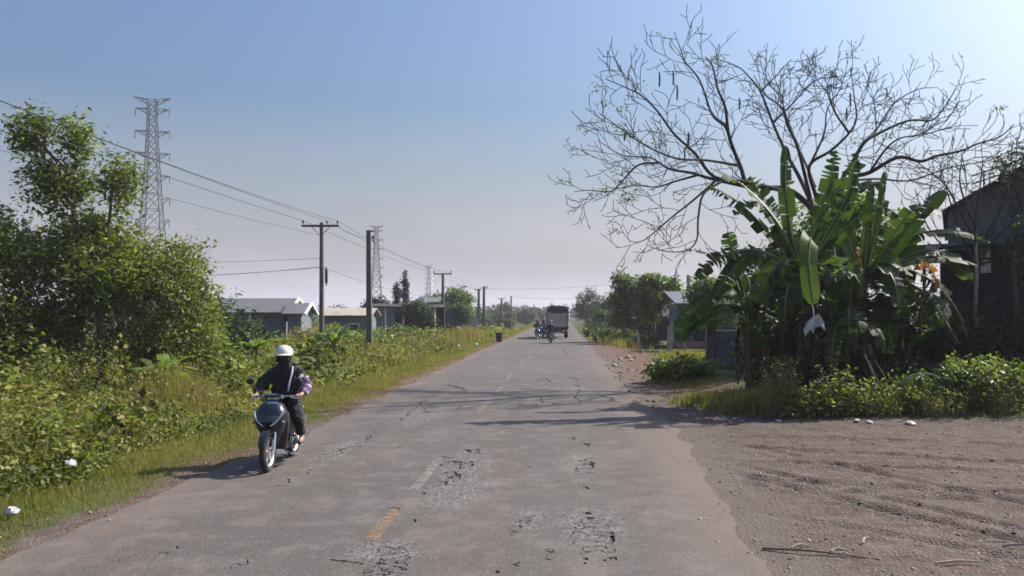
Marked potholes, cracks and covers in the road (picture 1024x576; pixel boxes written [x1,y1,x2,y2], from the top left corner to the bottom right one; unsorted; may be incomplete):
crack [284,423,380,486]
crack [114,546,179,571]
